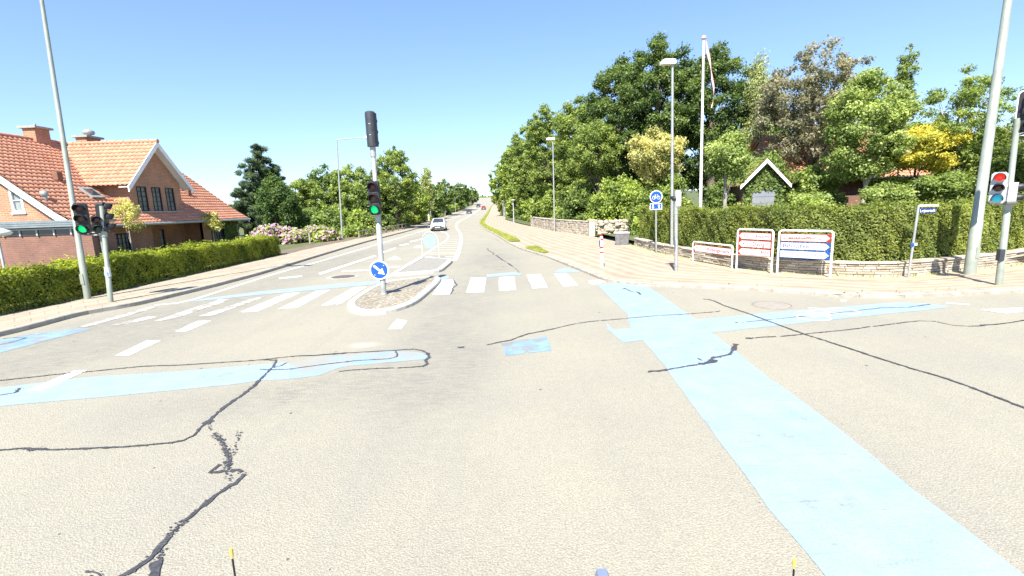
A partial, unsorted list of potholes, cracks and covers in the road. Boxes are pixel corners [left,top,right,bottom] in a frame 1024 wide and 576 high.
crack [0,359,286,576]
manhole cover [751,301,794,309]
crack [486,299,1024,408]
